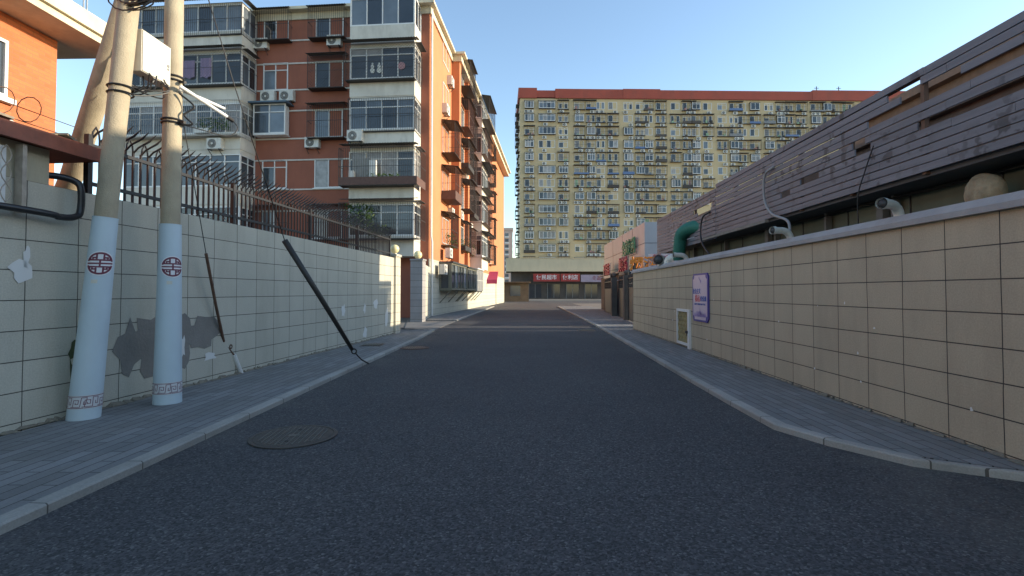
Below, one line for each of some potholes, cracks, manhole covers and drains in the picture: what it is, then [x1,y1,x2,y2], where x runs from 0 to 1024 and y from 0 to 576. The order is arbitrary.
manhole cover [248,425,338,449]
